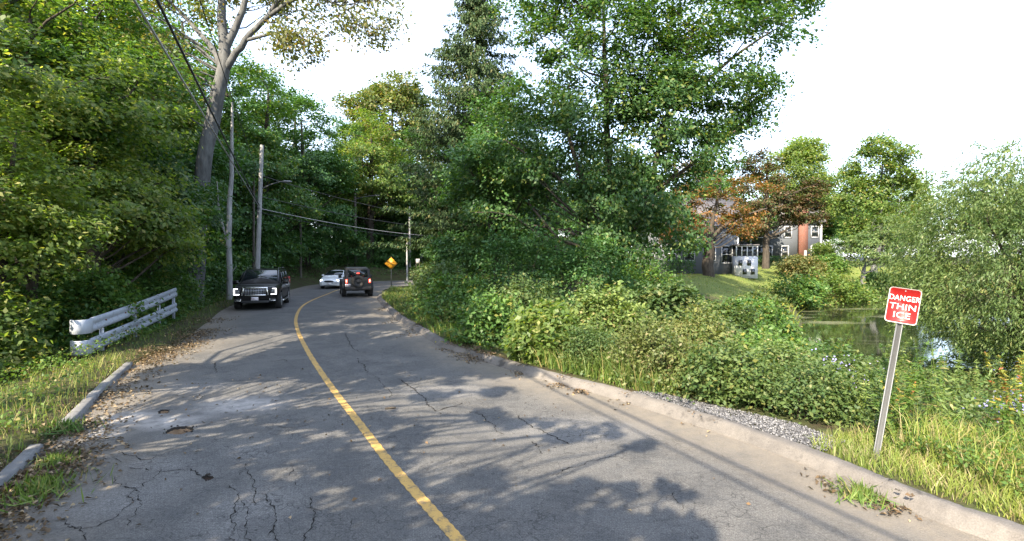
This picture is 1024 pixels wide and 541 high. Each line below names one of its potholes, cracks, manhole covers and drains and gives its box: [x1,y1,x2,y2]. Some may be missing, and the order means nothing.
crack [289,465,316,541]
crack [65,452,200,540]
pothole [163,425,197,434]
crack [229,464,278,541]
crack [482,414,569,454]
crack [346,335,462,411]
